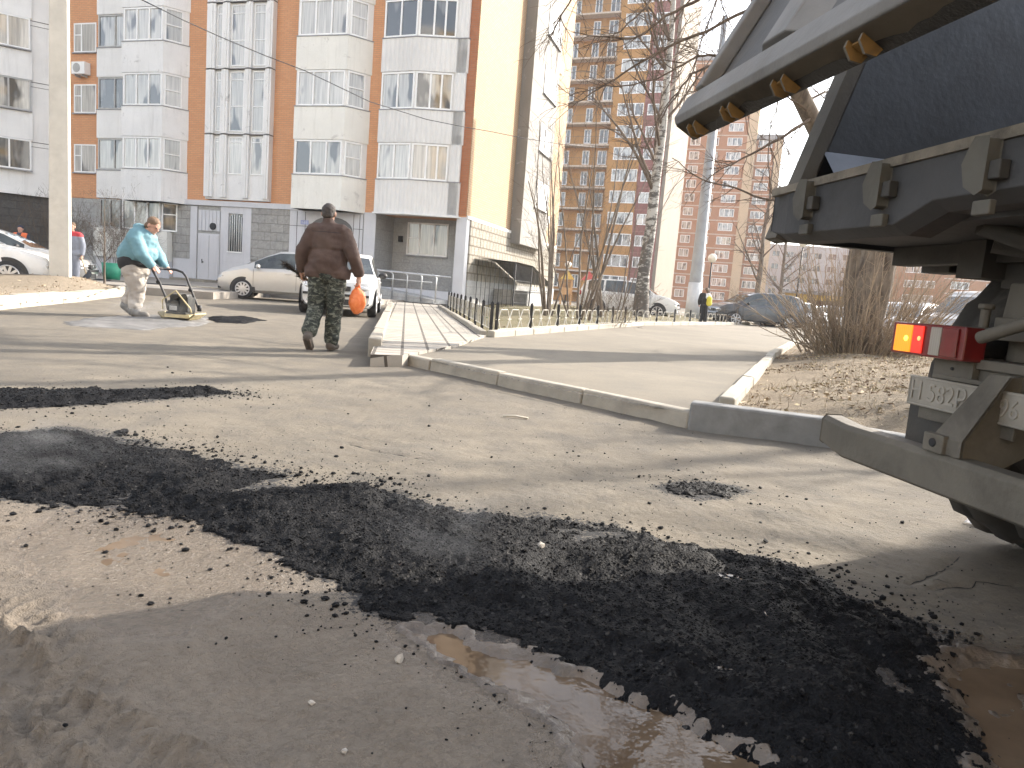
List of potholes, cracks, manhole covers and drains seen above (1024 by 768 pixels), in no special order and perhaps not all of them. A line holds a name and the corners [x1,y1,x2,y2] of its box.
pothole [393,621,780,768]
crack [910,558,1006,591]
